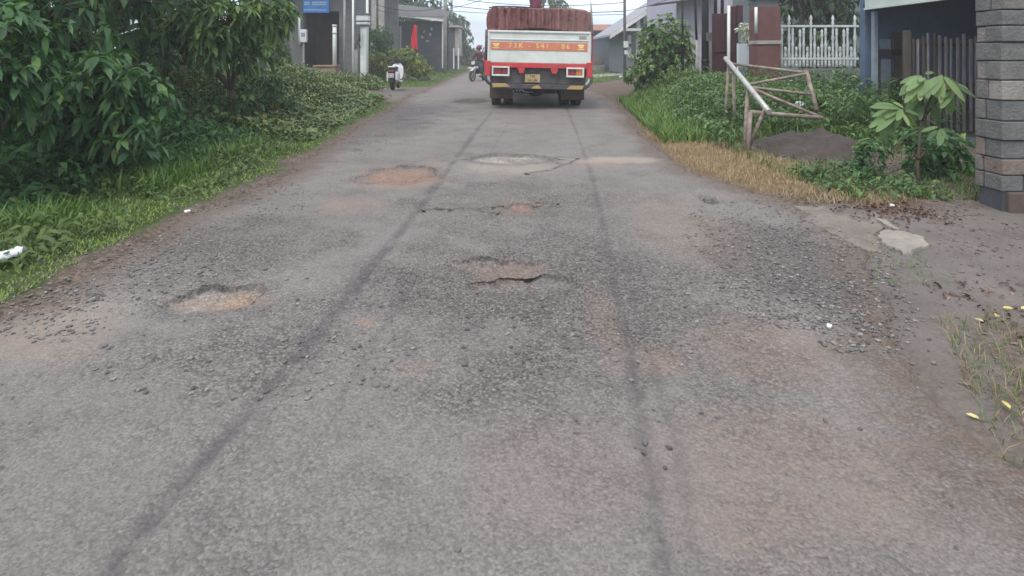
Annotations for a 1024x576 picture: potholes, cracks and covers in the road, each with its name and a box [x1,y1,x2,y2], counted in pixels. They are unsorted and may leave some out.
crack [527,156,581,175]
pothole [457,153,559,167]
pothole [433,252,552,282]
crack [421,201,559,216]
pothole [348,164,444,187]
pothole [444,268,601,304]
pothole [502,200,543,214]
pothole [140,280,282,321]
pothole [696,194,727,205]
